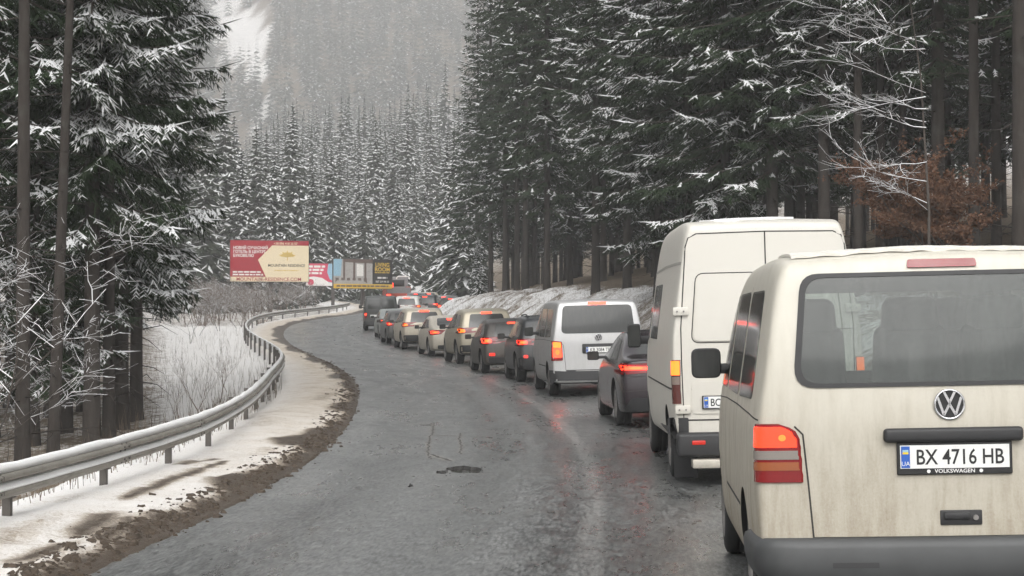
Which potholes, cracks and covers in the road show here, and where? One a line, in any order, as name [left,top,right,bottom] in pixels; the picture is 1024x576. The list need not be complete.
crack [420,423,465,461]
pothole [444,466,486,474]
